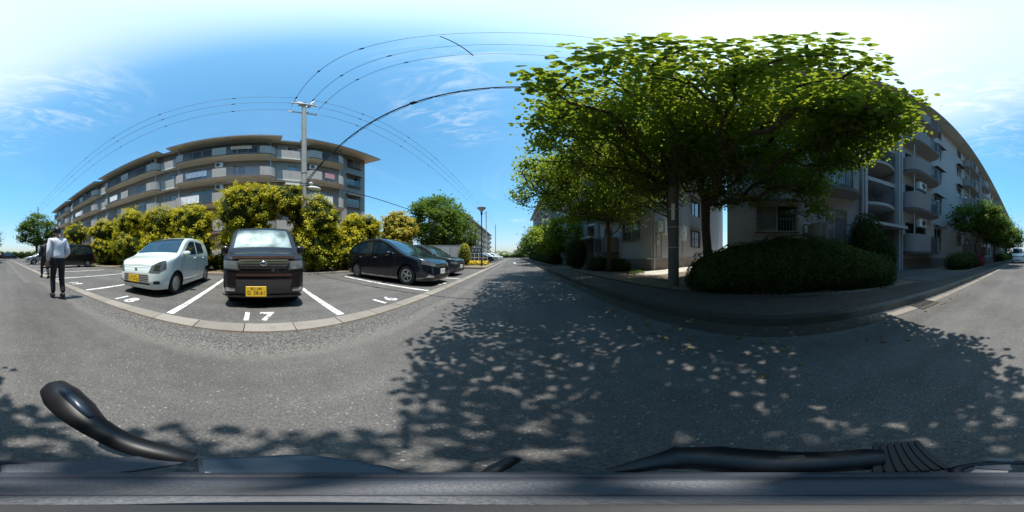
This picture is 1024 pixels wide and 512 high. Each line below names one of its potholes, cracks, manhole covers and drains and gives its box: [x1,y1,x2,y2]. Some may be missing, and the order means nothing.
drain grate [907,299,940,310]
